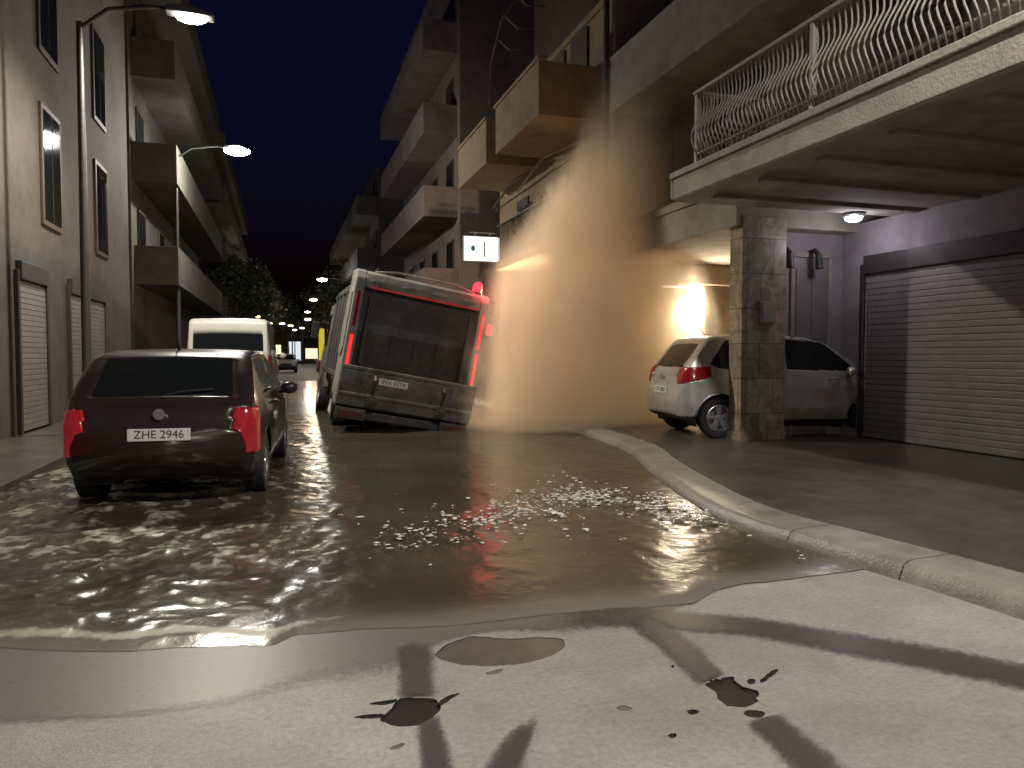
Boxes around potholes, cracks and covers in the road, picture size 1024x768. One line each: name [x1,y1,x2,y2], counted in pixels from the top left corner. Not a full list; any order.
pothole [436,636,565,666]
pothole [705,676,759,707]
pothole [380,697,441,727]
